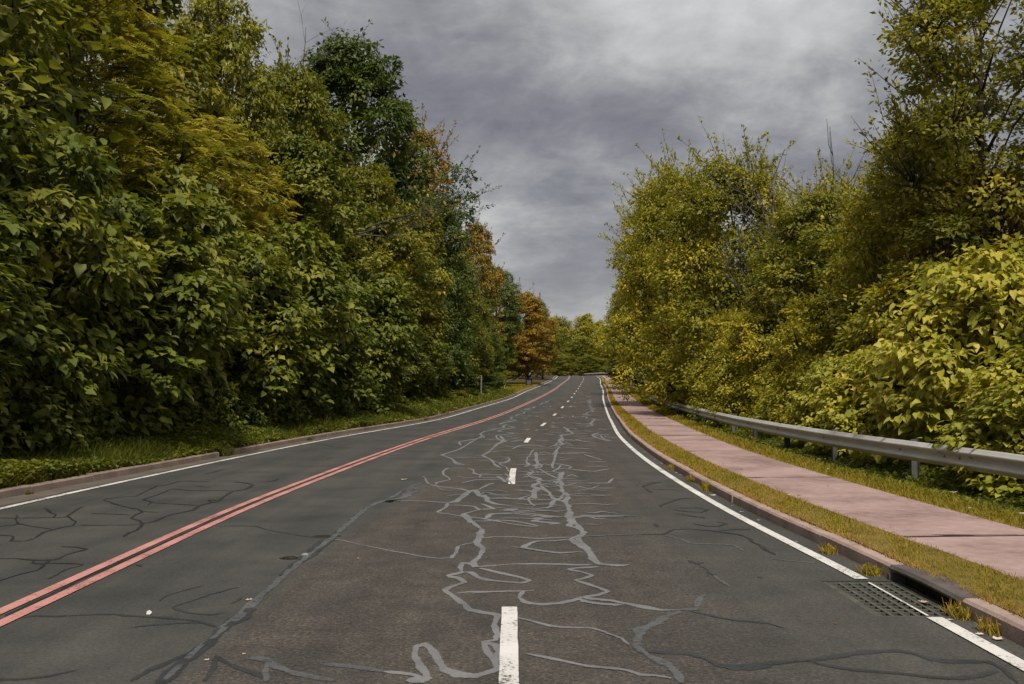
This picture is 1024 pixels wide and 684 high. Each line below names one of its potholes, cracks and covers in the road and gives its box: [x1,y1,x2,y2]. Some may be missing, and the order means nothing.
drain grate [824,564,987,616]
